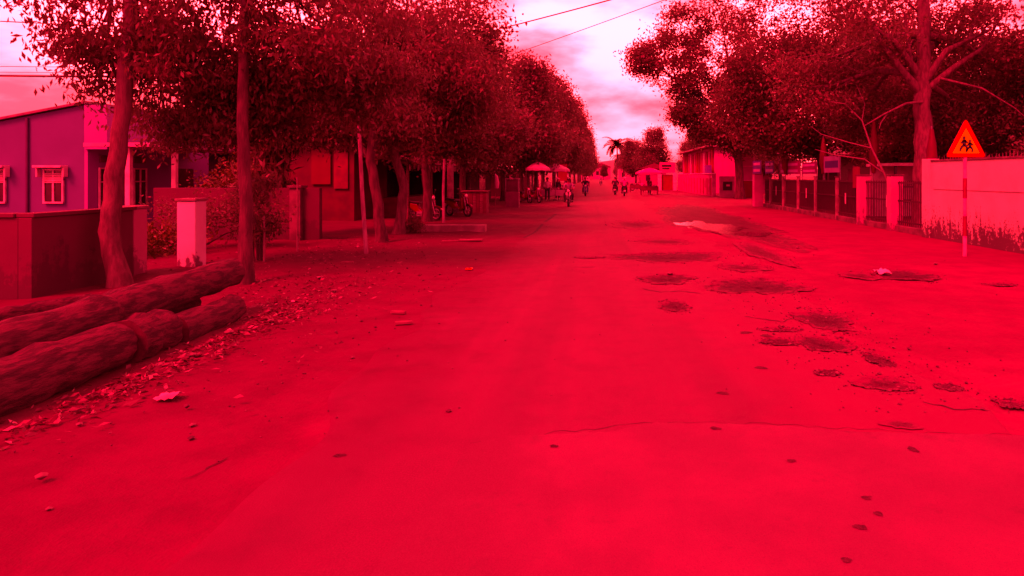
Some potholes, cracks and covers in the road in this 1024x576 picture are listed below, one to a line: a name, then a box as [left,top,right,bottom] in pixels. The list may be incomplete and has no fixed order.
pothole [656,204,818,253]
crack [474,421,1022,443]
pothole [605,252,723,262]
pothole [849,376,919,391]
pothole [870,269,941,281]
pothole [637,274,701,284]
pothole [788,311,857,331]
pothole [865,354,896,366]
pothole [658,300,690,312]
pothole [703,277,817,295]
pothole [995,399,1024,408]
pothole [877,420,924,429]
